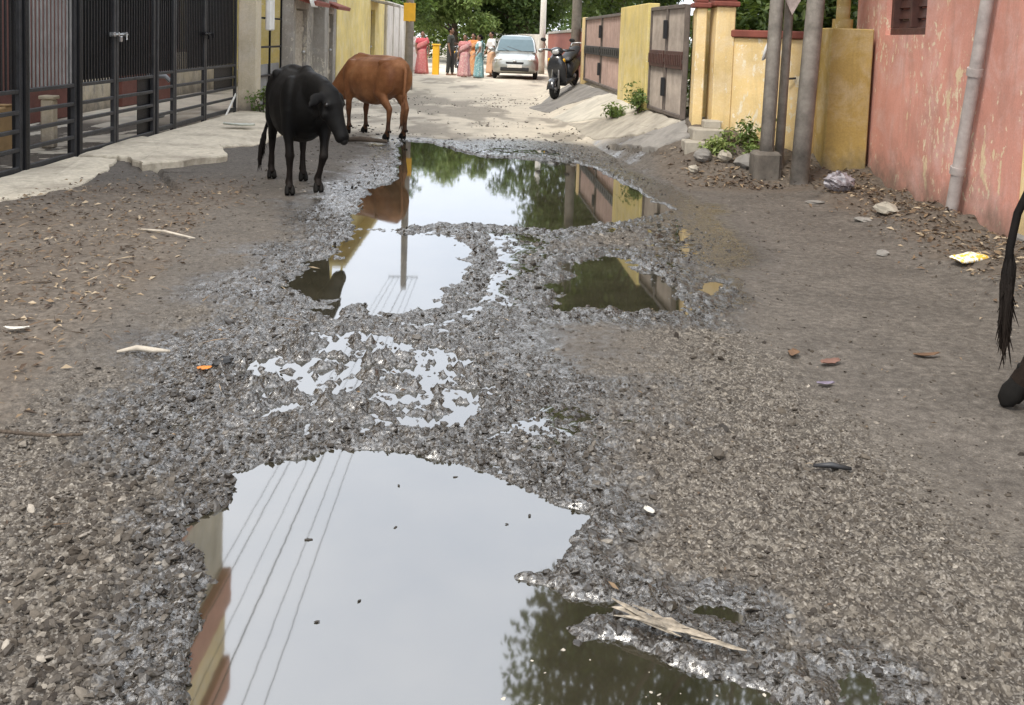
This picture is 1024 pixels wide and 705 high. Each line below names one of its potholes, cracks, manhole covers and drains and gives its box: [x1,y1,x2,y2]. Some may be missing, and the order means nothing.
pothole [518,253,700,315]
pothole [217,321,526,439]
pothole [252,225,486,325]
pothole [157,438,813,705]
pothole [341,139,680,231]
